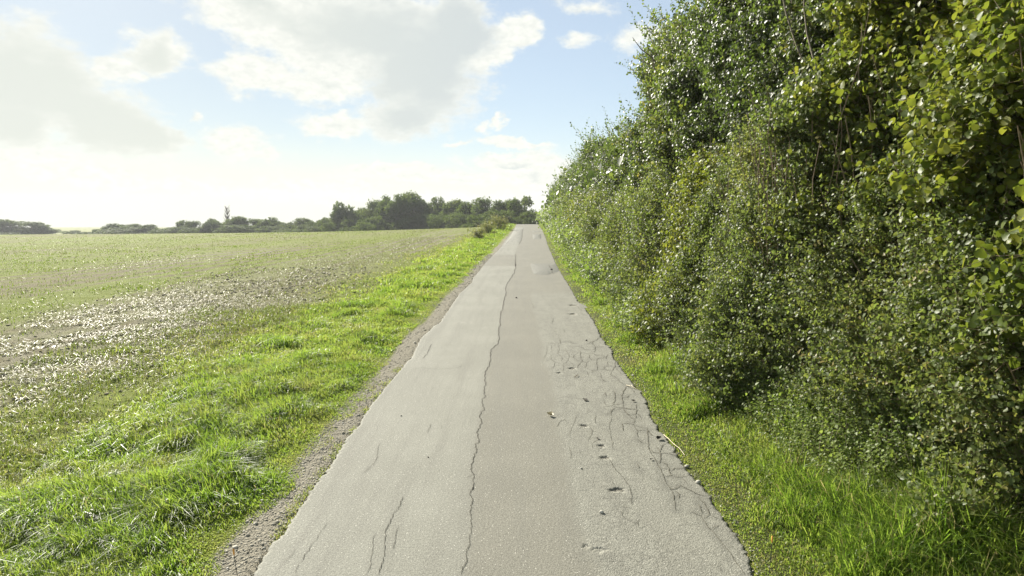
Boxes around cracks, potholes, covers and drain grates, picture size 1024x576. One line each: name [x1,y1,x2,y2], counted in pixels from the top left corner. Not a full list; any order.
crack [461,230,523,572]
crack [531,302,744,573]
crack [368,497,403,571]
